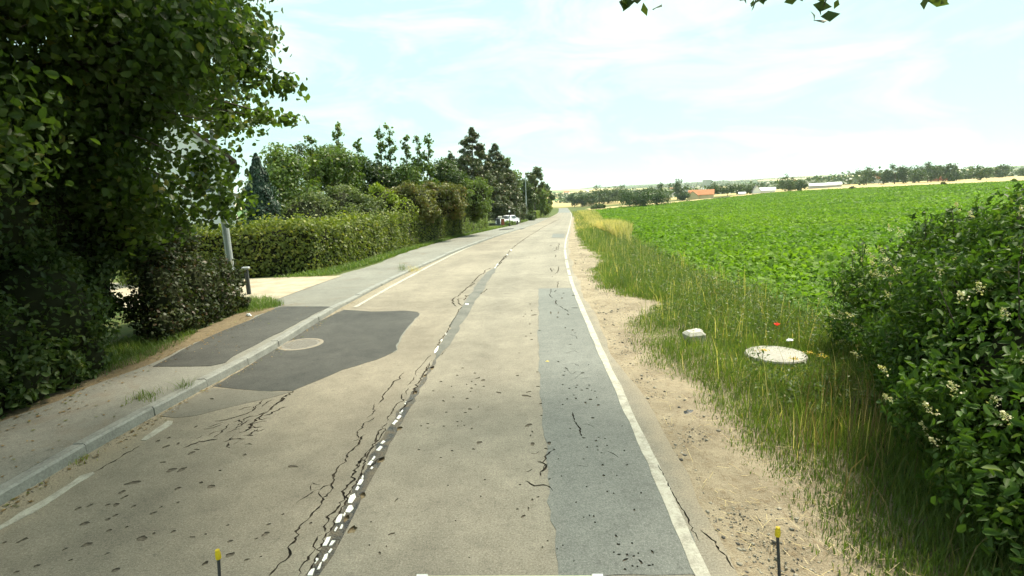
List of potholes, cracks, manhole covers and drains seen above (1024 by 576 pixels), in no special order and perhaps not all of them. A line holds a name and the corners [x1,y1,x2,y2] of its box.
crack [526,450,554,491]
manhole cover [278,338,324,351]
crack [269,268,490,576]
crack [184,391,294,448]
